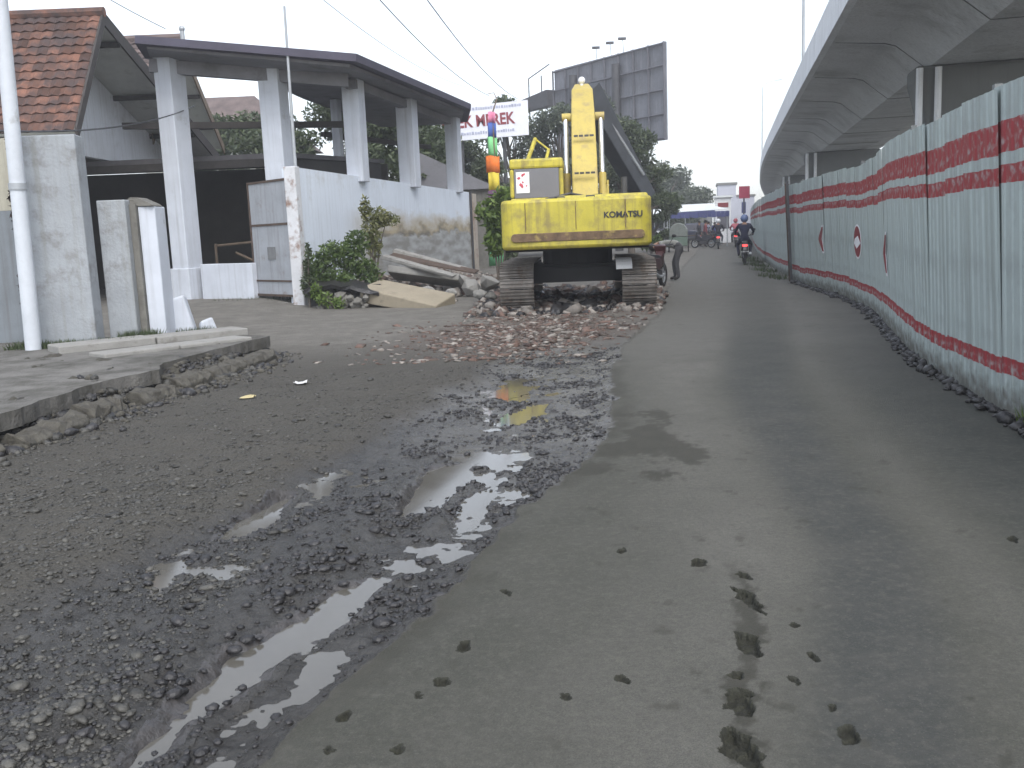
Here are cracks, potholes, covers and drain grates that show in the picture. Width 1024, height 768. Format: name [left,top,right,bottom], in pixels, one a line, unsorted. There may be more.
pothole [495,587,520,600]
pothole [484,374,534,401]
pothole [427,674,459,691]
pothole [608,671,639,689]
pothole [713,685,762,723]
pothole [829,720,868,750]
pothole [385,461,481,522]
pothole [85,570,404,768]
pothole [685,557,712,569]
pothole [710,721,774,768]
